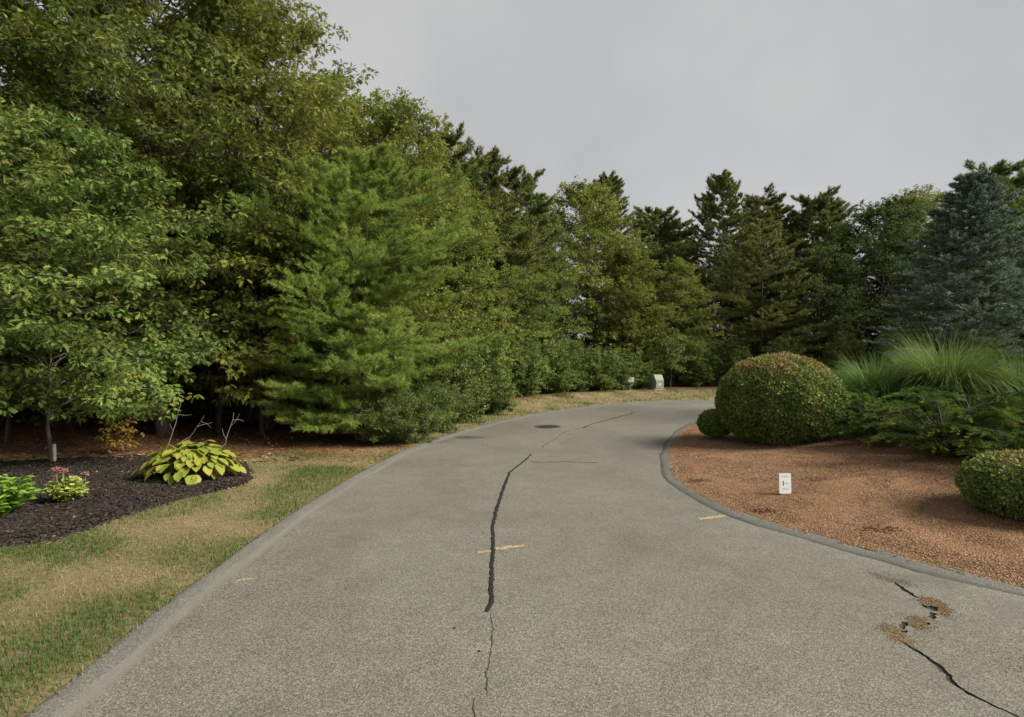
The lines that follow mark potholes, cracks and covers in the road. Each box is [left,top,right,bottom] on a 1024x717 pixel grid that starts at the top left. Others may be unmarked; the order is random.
crack [472,614,495,717]
crack [894,582,919,598]
crack [899,640,1019,717]
crack [532,428,597,463]
